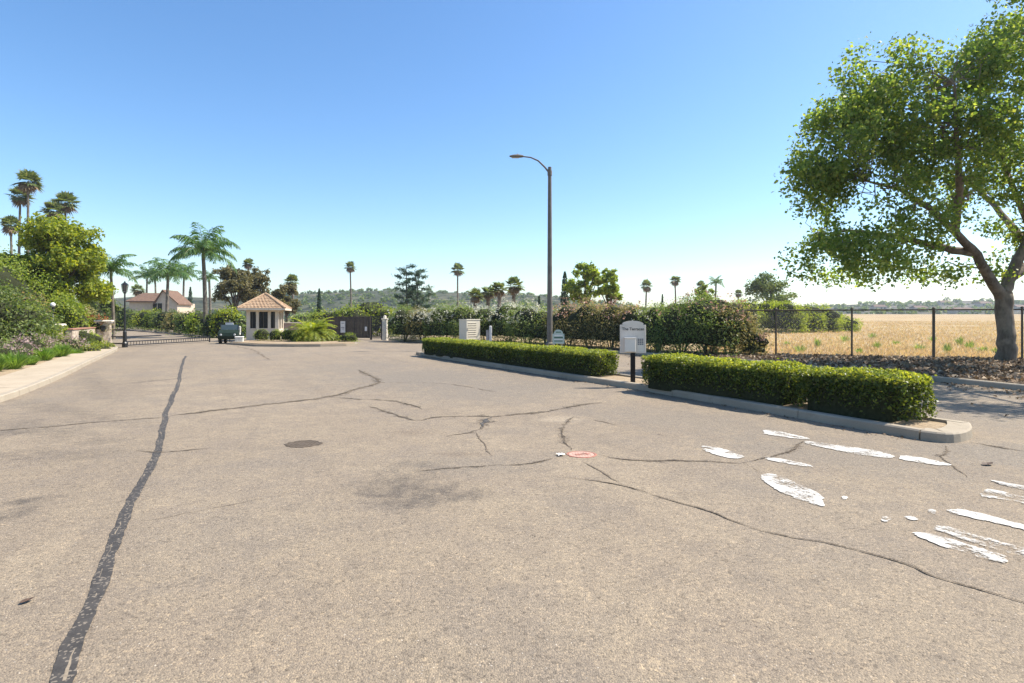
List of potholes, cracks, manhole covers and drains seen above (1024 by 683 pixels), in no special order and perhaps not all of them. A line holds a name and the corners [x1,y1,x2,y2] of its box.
crack [7,370,1023,602]
manhole cover [284,440,323,448]
